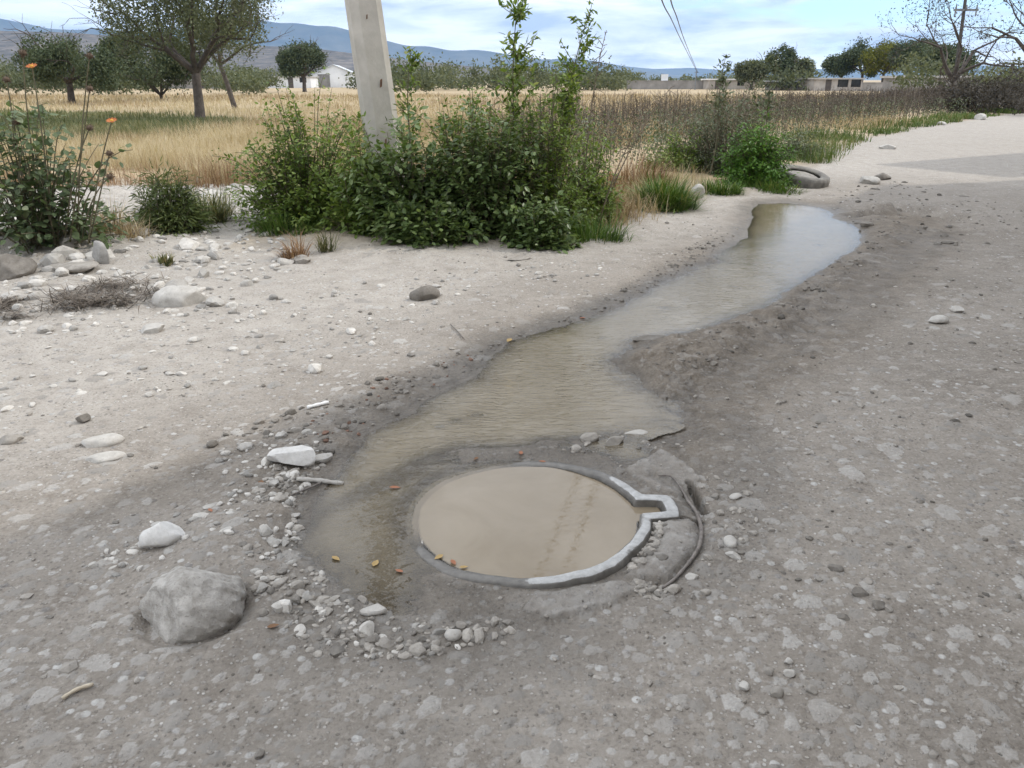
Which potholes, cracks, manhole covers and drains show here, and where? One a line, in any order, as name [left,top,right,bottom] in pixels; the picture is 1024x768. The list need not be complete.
pothole [281,200,870,632]
